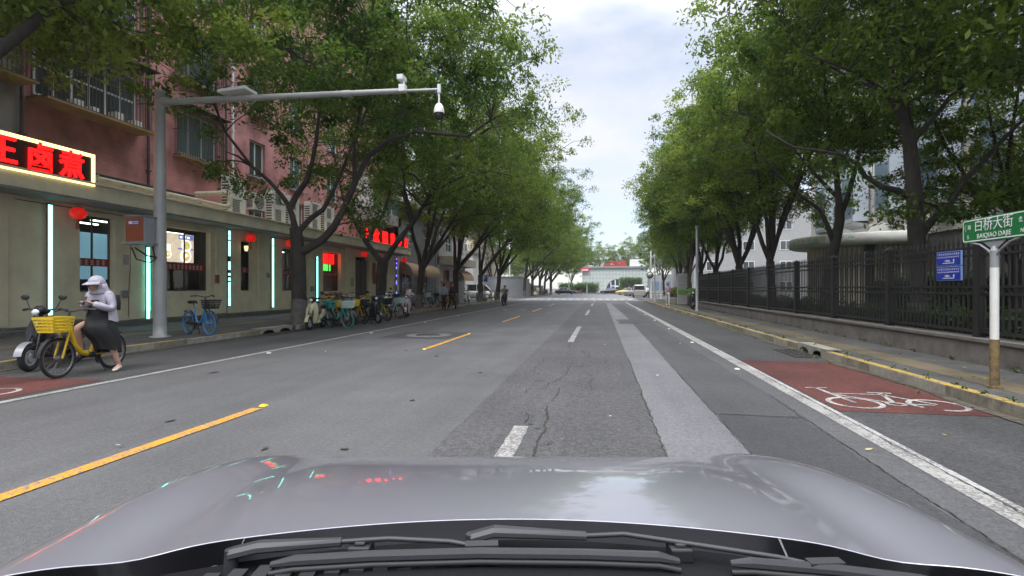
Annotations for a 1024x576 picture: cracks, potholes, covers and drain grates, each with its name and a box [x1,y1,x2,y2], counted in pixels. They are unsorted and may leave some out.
drain grate [798,342,842,358]
drain grate [773,349,822,358]
crack [520,343,610,457]
